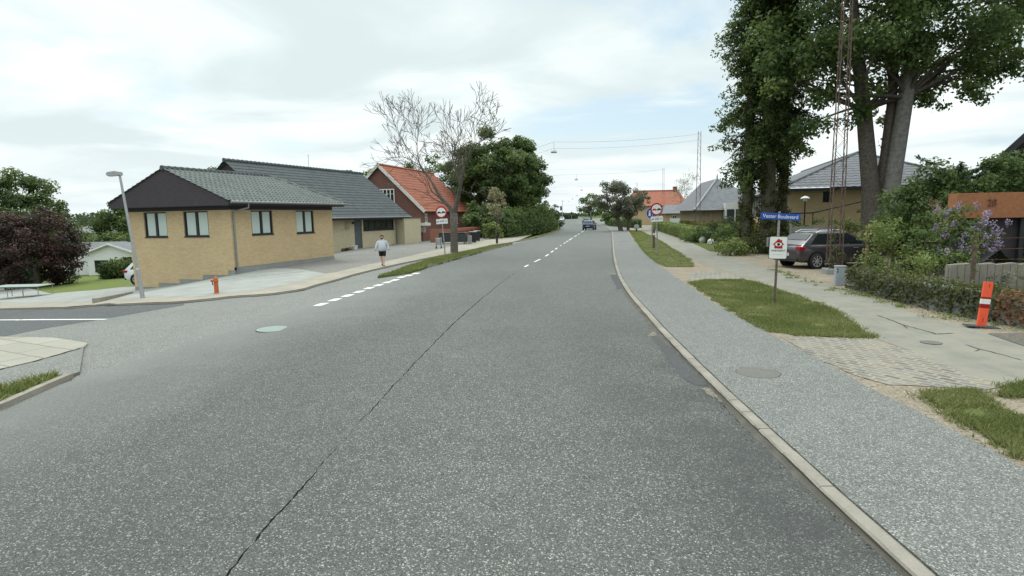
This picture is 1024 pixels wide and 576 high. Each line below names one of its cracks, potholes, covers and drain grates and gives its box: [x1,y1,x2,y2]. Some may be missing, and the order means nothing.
manhole cover [736,367,781,378]
